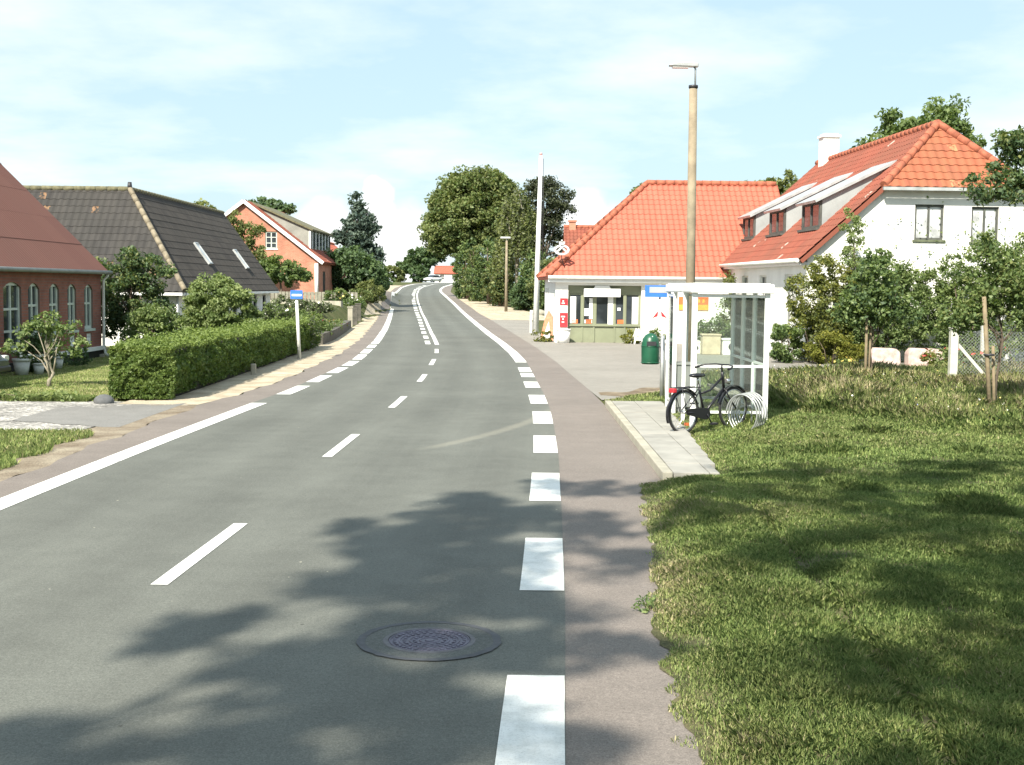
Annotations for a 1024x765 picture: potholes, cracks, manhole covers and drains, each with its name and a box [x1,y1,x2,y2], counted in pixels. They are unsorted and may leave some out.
manhole cover [356,621,501,661]
